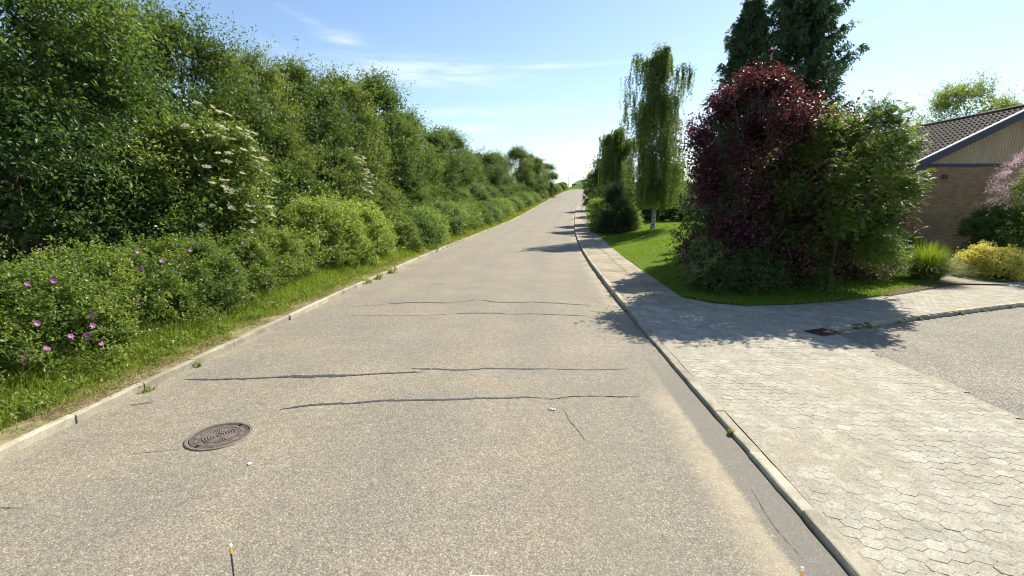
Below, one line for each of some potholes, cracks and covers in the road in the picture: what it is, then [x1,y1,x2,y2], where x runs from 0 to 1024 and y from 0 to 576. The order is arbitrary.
manhole cover [183,422,253,451]
drain grate [804,328,841,336]
